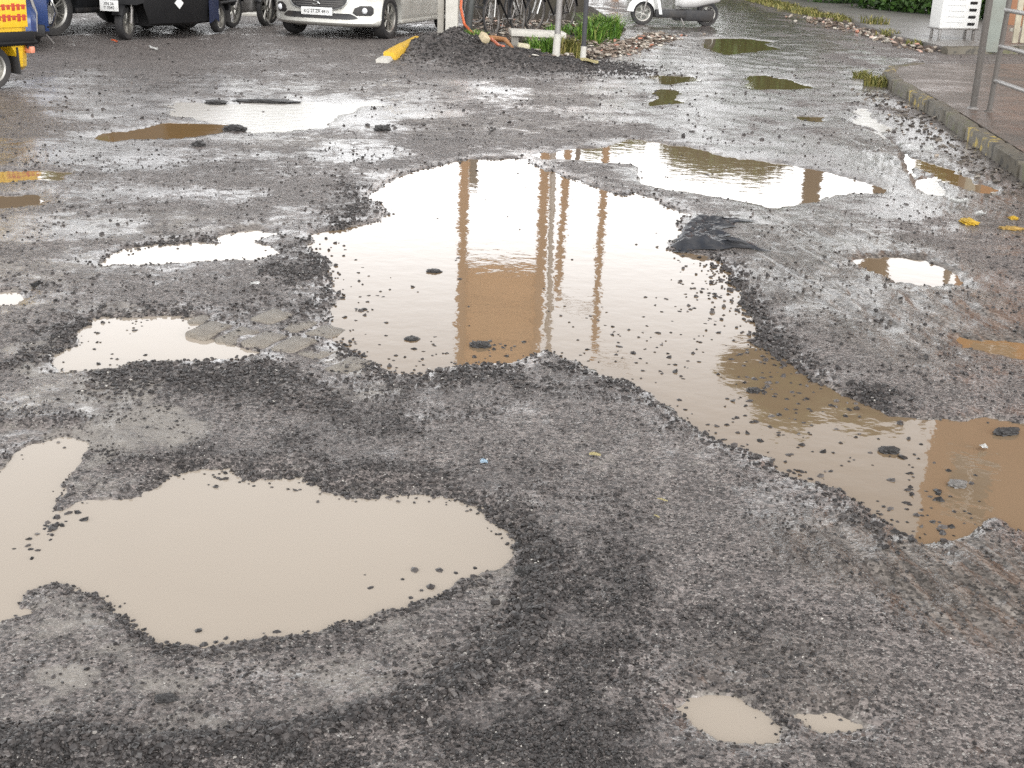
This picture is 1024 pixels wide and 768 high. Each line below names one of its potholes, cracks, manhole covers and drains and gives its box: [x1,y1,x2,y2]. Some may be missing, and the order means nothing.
pothole [34,304,284,377]
pothole [292,154,1024,555]
pothole [665,683,795,749]
pothole [86,223,291,269]
pothole [79,118,230,144]
pothole [692,37,785,55]
pothole [152,95,395,135]
pothole [514,134,907,212]
pothole [0,418,541,734]
pothole [783,704,870,741]
pothole [737,73,819,90]
